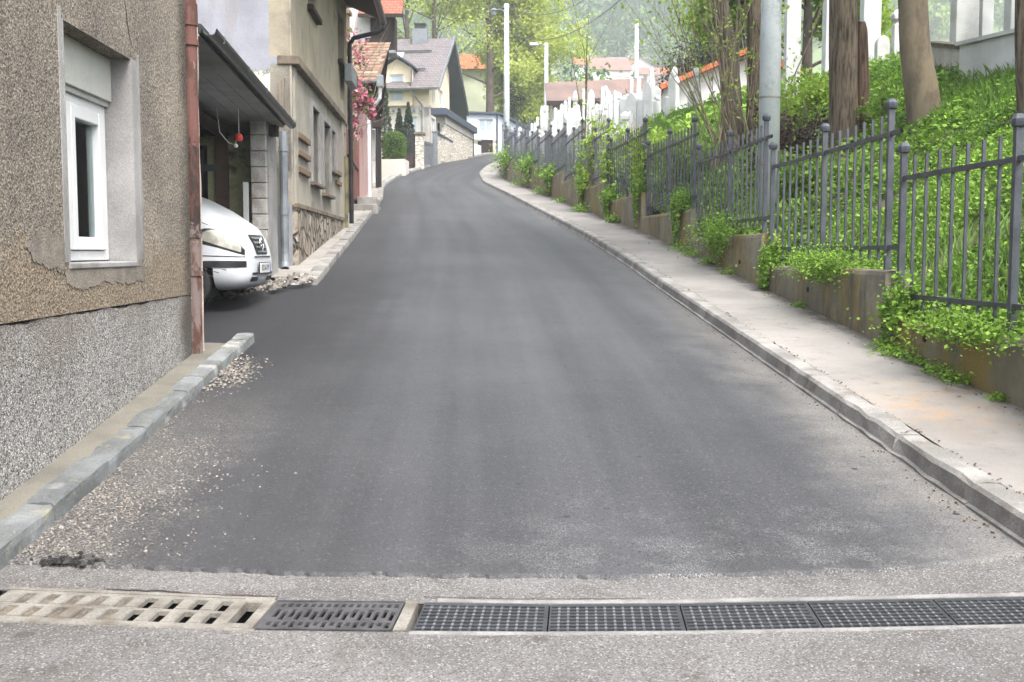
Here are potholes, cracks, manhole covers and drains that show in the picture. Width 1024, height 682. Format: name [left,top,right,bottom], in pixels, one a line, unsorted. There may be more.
drain grate [254,600,405,632]
